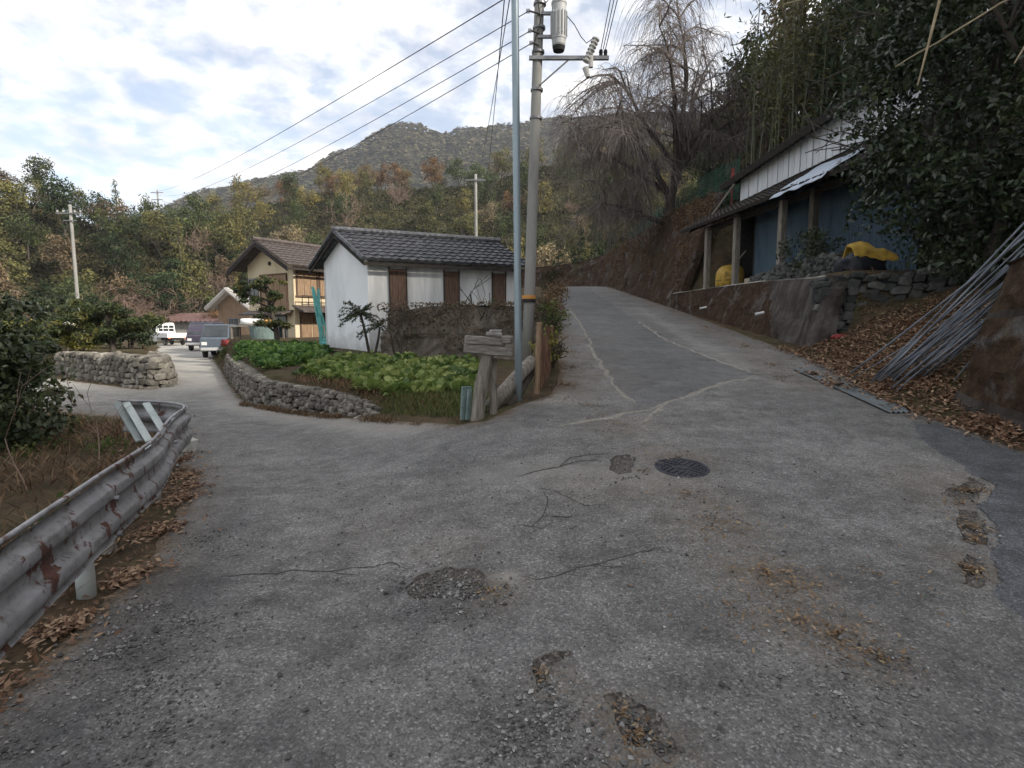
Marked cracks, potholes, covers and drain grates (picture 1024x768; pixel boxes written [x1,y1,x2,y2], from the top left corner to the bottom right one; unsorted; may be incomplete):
pothole [598,451,647,479]
pothole [938,547,1003,599]
manhole cover [643,454,722,483]
pothole [389,559,504,613]
pothole [926,473,997,505]
crack [519,546,662,580]
pothole [580,676,709,768]
crack [228,562,406,576]
pothole [939,505,1002,553]
crack [518,453,608,529]
